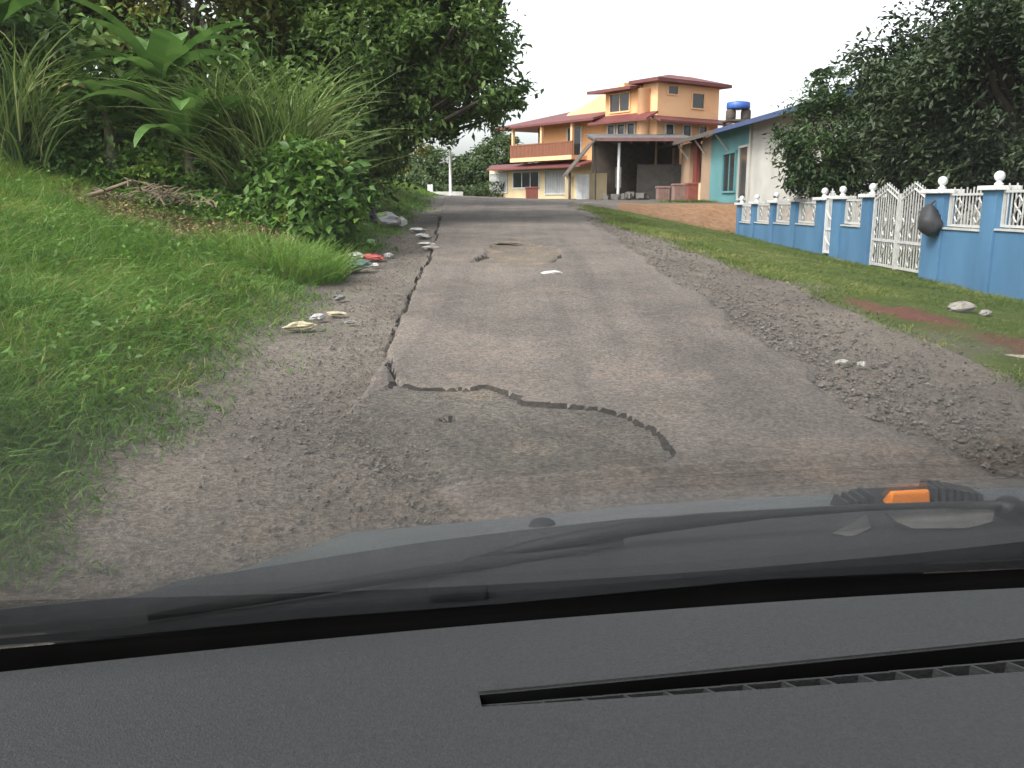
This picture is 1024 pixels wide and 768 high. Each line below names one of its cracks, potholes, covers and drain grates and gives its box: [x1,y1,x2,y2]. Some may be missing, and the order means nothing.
crack [385,217,441,381]
pothole [473,241,563,265]
